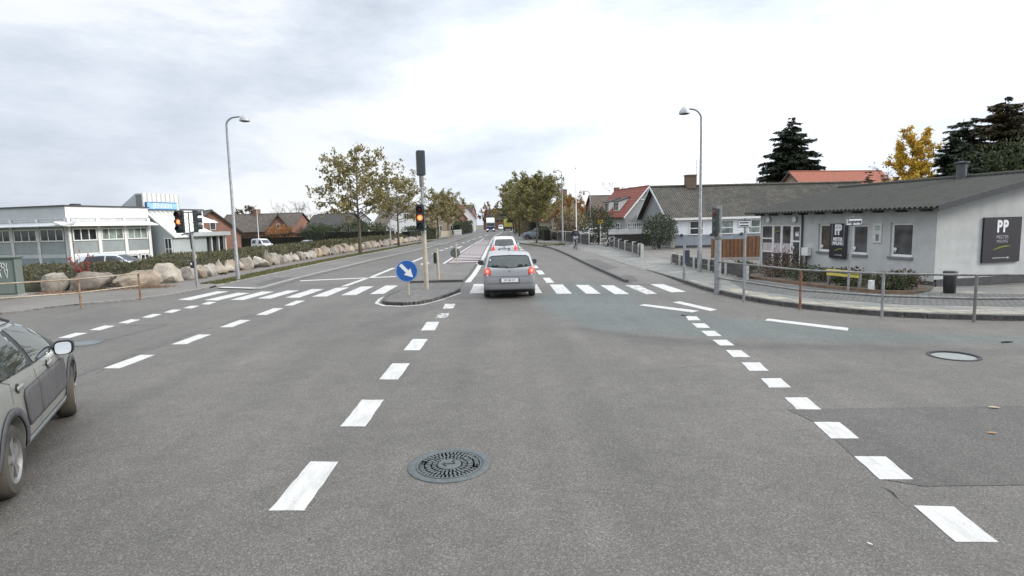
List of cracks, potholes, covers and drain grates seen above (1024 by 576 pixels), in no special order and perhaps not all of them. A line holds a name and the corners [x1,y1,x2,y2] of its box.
manhole cover [407,448,491,484]
manhole cover [926,350,983,361]
